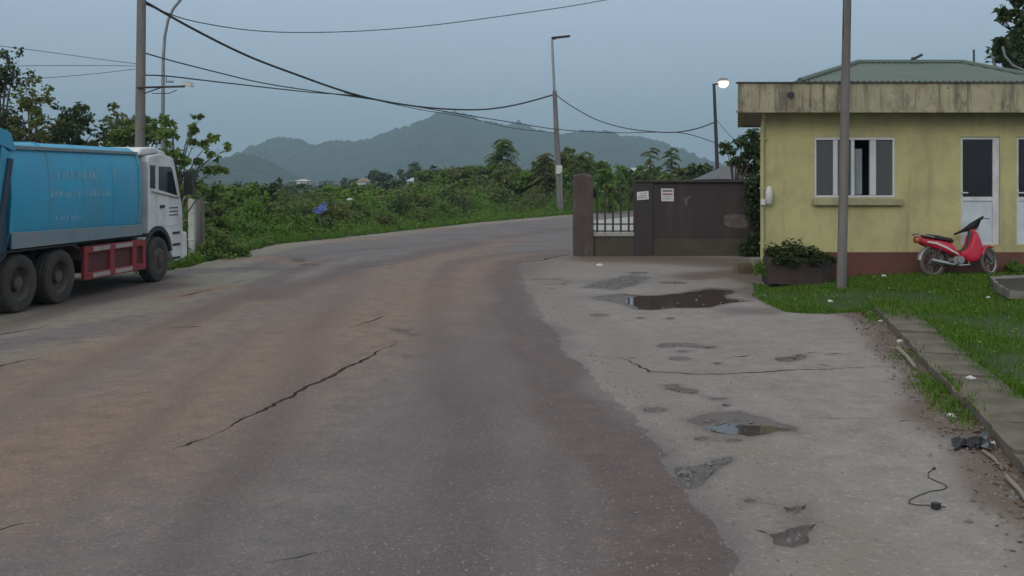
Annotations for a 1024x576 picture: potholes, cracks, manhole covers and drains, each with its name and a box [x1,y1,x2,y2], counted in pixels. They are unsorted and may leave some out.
pothole [685,411,798,438]
crack [581,352,894,375]
pothole [783,505,806,514]
pothole [774,354,806,362]
crack [172,342,396,450]
pothole [769,524,816,548]
pothole [591,288,751,310]
pothole [674,456,734,489]
pothole [582,275,650,290]
pothole [664,384,698,394]
